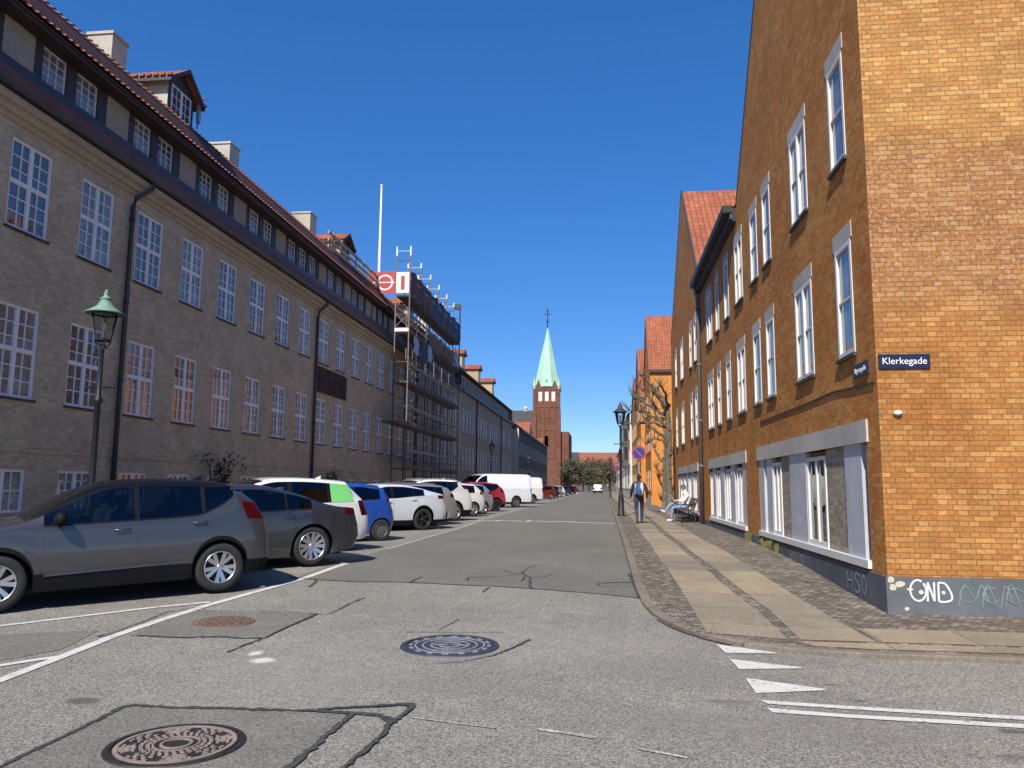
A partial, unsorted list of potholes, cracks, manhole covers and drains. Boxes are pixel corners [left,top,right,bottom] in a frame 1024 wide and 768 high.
crack [466,565,550,592]
manhole cover [101,723,247,768]
manhole cover [192,616,255,628]
manhole cover [400,635,500,658]
